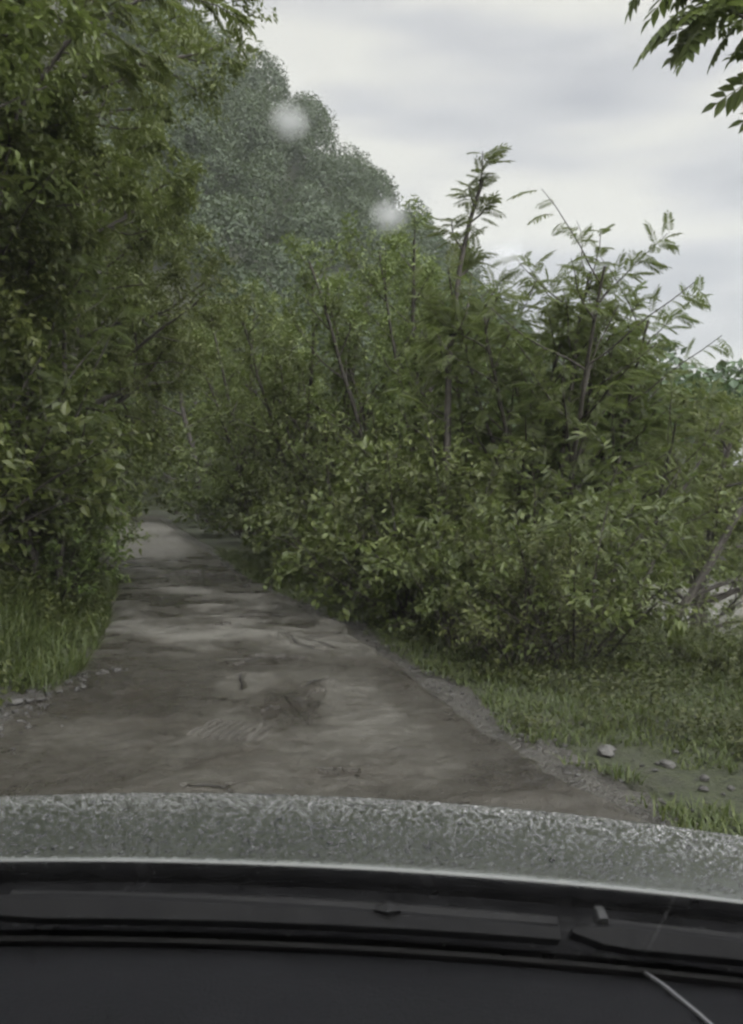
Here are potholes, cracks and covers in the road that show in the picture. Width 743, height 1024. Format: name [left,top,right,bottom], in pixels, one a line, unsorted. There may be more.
pothole [284,682,336,725]
pothole [254,700,288,729]
crack [270,631,343,649]
